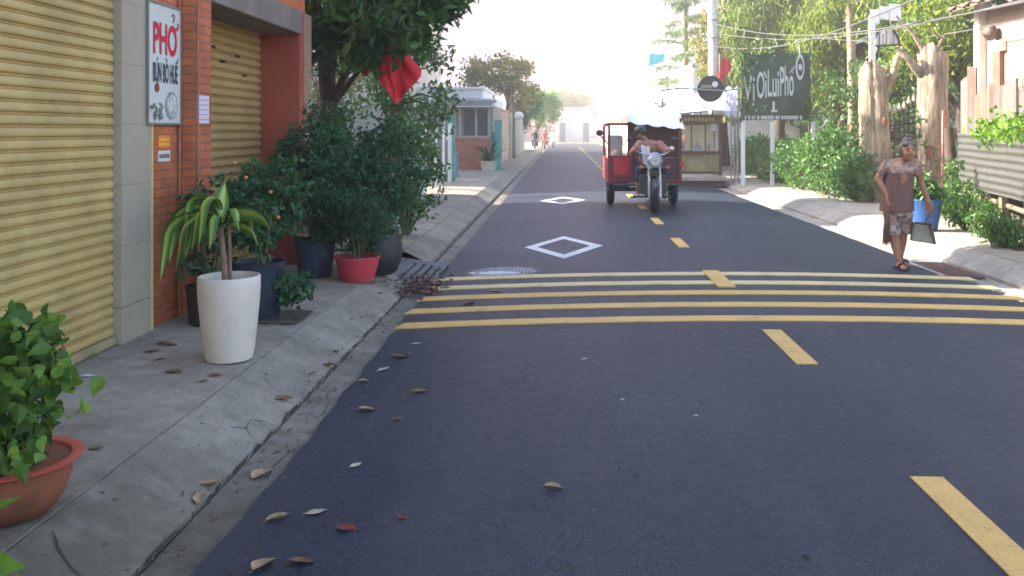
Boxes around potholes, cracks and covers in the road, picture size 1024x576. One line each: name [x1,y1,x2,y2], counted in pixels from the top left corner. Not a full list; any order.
manhole cover [464,266,540,277]
crack [53,531,82,576]
drain grate [393,257,448,286]
